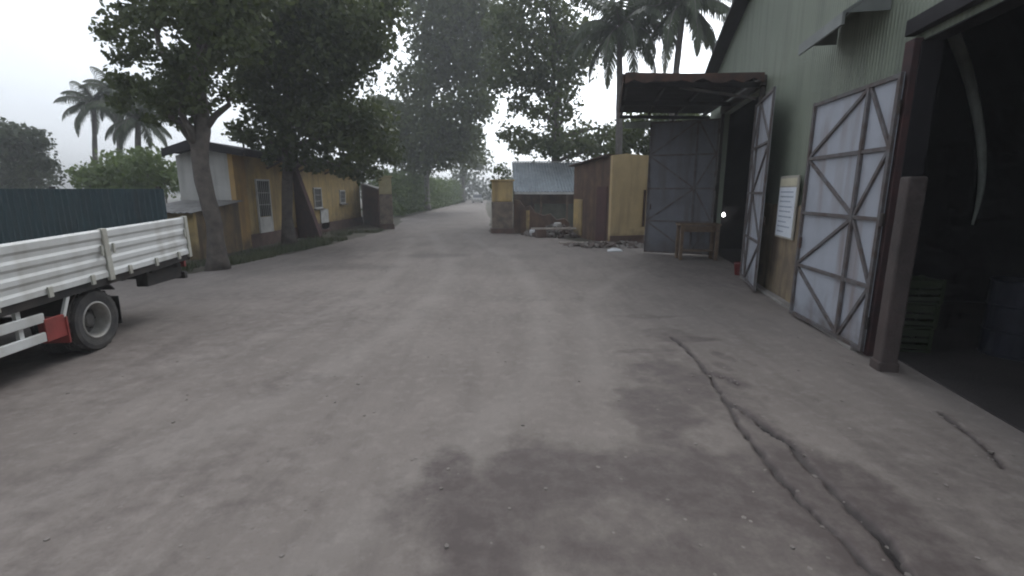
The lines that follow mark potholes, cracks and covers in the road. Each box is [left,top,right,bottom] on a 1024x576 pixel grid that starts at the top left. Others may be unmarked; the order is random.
crack [673,340,904,576]
